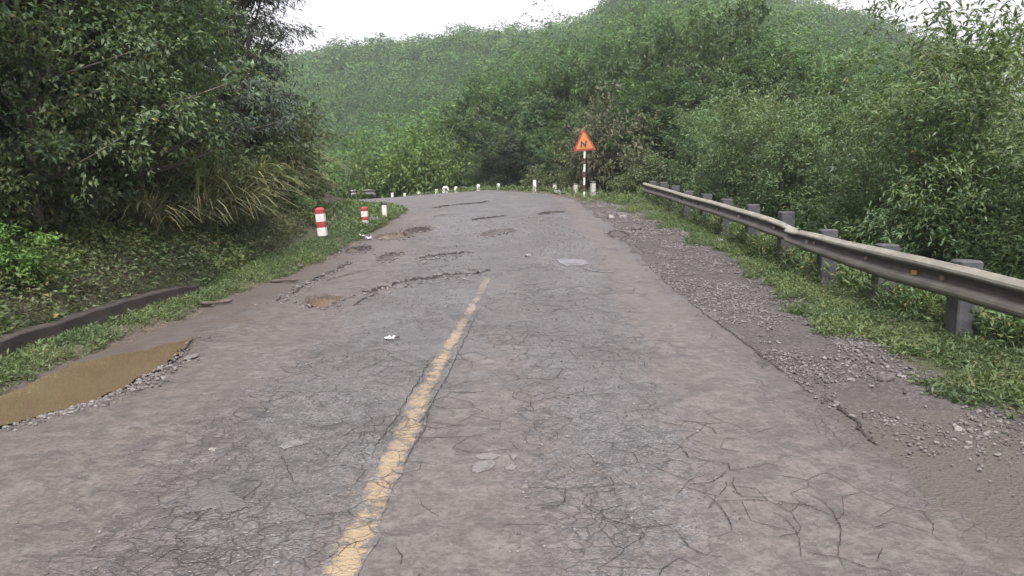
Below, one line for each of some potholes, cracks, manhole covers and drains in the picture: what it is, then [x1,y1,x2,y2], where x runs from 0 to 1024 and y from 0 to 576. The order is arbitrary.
pothole [377,252,401,262]
pothole [345,246,371,254]
crack [172,479,264,550]
pothole [480,228,517,237]
pothole [302,294,342,309]
crack [233,237,940,576]
pothole [403,227,432,235]
pothole [372,232,411,240]
